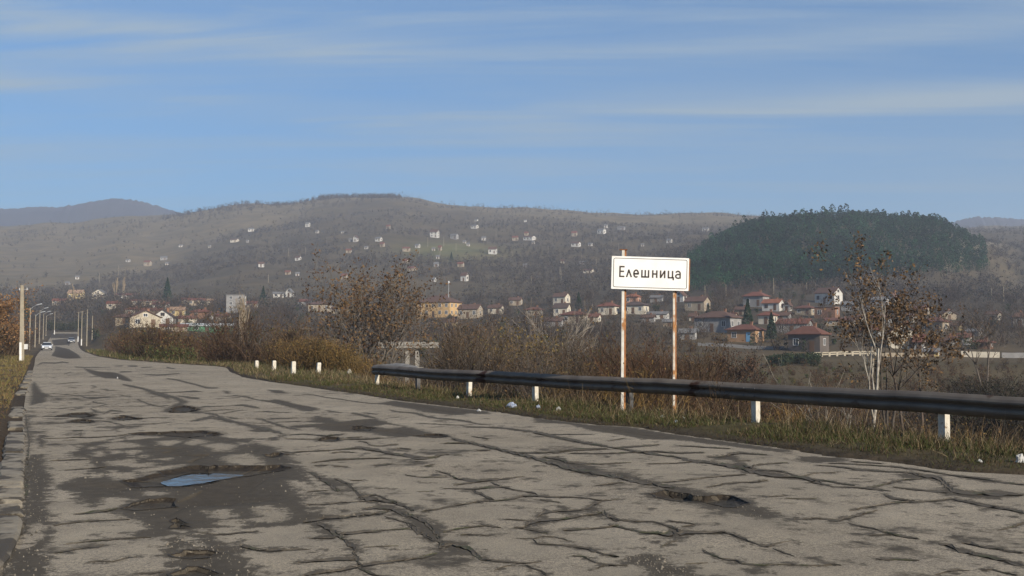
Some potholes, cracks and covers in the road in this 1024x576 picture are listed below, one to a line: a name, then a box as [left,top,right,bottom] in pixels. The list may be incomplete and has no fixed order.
crack [193,394,1024,576]
crack [3,362,168,576]
pothole [168,549,223,559]
pothole [120,465,294,488]
pothole [647,490,752,508]
pothole [129,430,222,438]
pothole [119,497,179,511]
